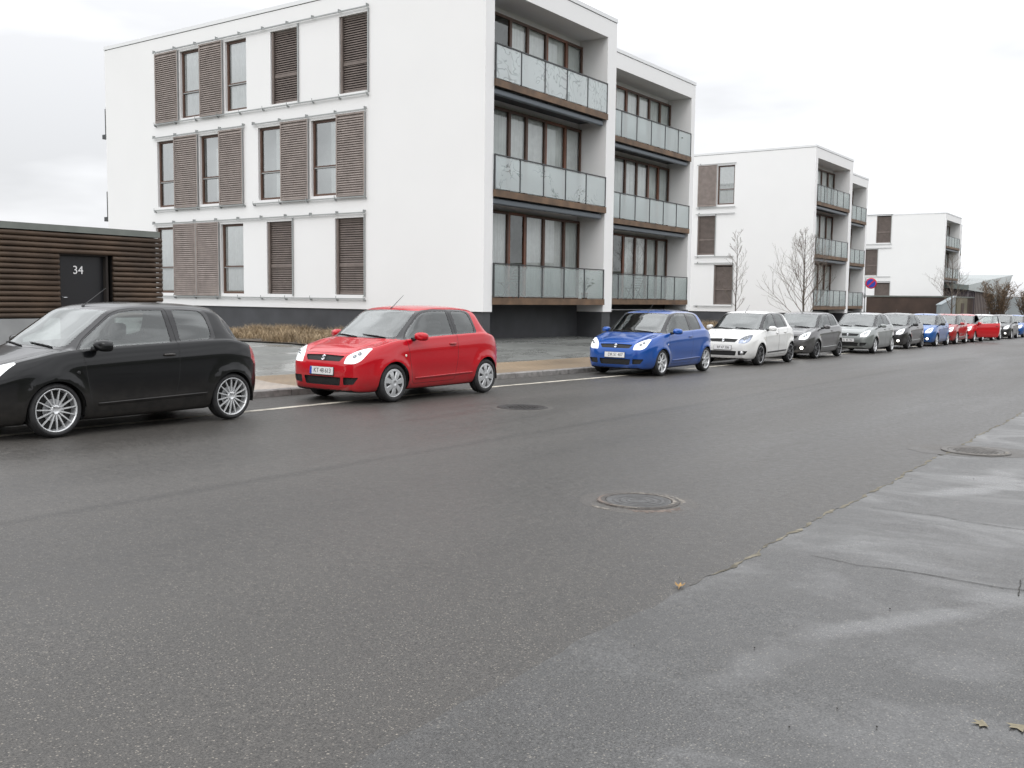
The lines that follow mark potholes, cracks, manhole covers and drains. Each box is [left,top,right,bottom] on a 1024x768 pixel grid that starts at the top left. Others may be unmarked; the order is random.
manhole cover [941,446,1012,456]
crack [813,555,1021,595]
manhole cover [580,490,699,514]
